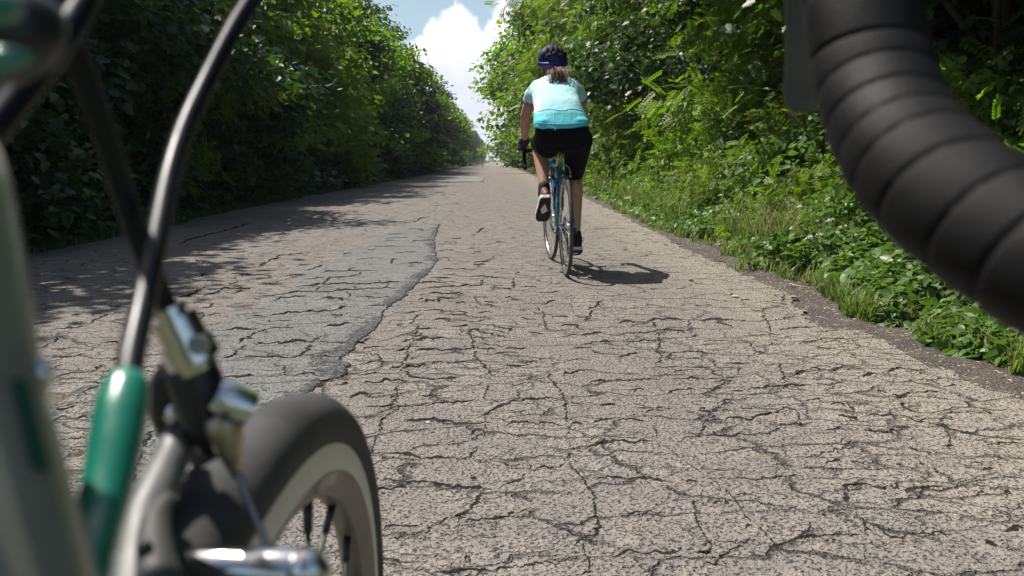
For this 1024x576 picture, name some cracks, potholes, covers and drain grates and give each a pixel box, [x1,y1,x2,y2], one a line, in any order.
crack [41,304,128,461]
crack [171,182,1024,576]
